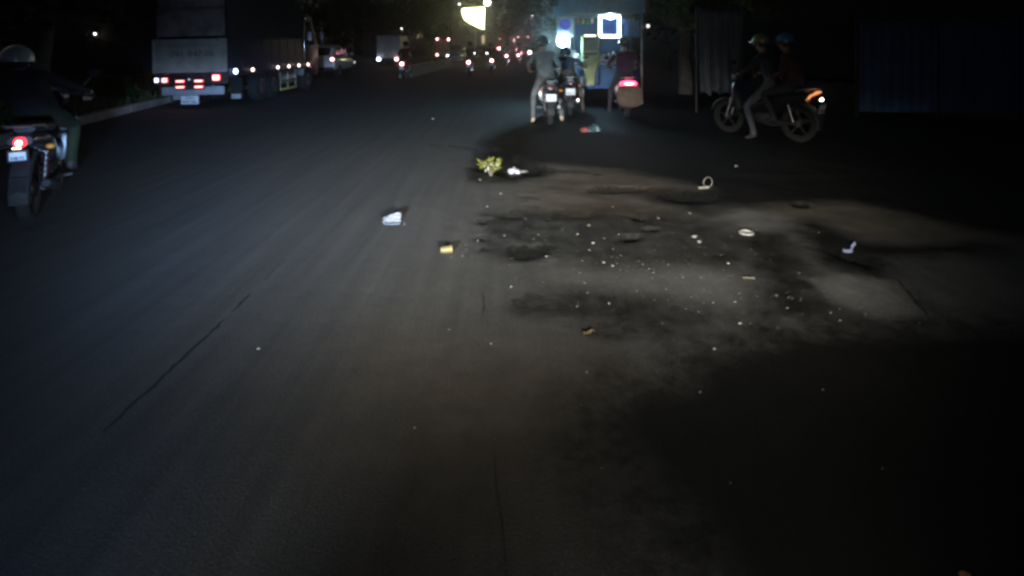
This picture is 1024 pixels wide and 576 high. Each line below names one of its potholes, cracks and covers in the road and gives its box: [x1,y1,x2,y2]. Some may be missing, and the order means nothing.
crack [494,452,507,573]
pothole [512,294,568,311]
pothole [505,245,555,260]
